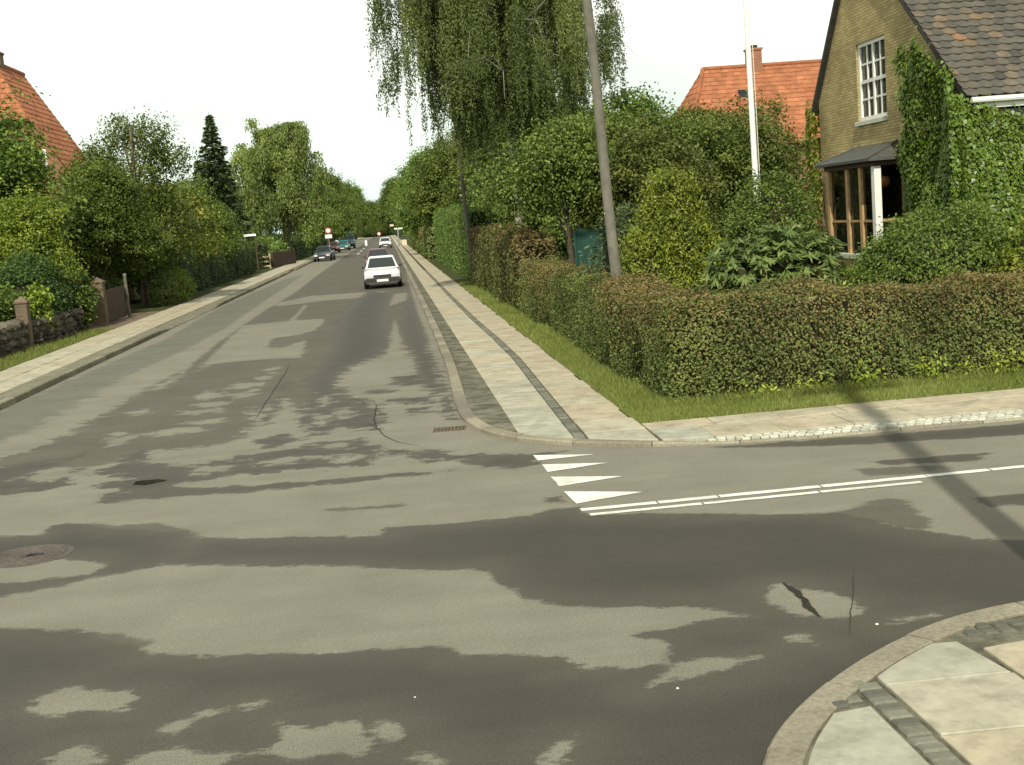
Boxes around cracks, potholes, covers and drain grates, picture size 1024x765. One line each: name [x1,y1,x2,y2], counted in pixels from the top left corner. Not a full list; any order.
crack [783,582,821,617]
drain grate [432,425,466,433]
manhole cover [0,544,75,568]
crack [350,397,423,447]
pothole [120,476,179,488]
